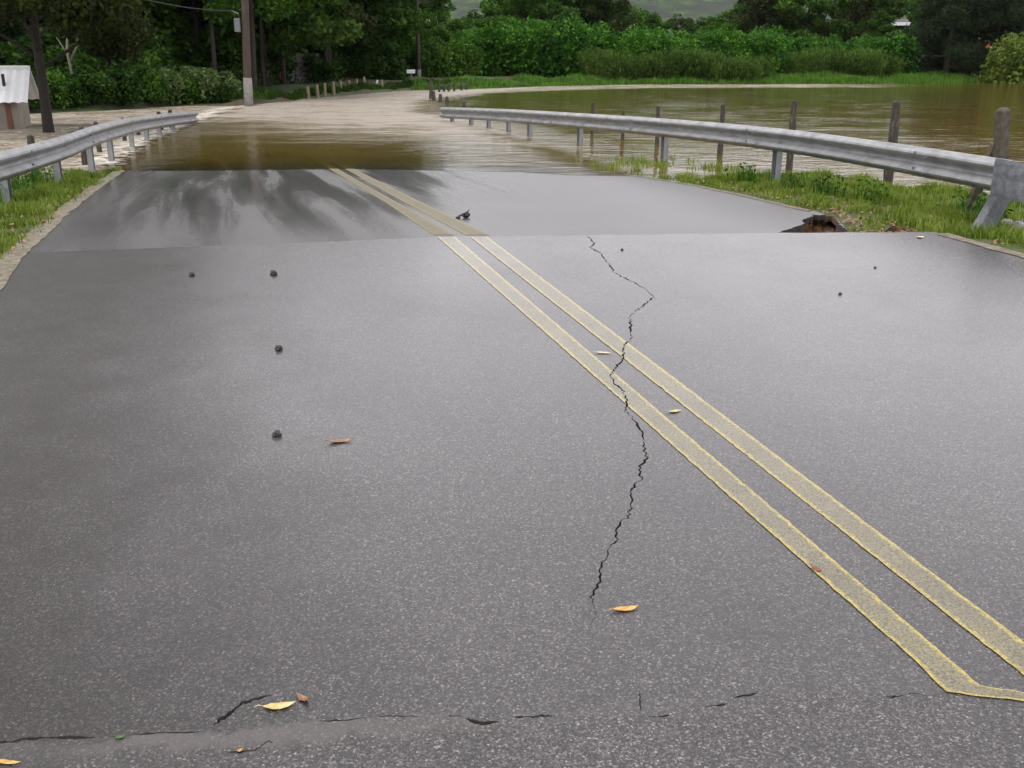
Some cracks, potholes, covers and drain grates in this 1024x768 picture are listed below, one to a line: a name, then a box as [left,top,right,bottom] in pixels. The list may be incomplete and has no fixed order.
pothole [795,219,836,233]
crack [588,236,654,625]
crack [213,695,272,753]
